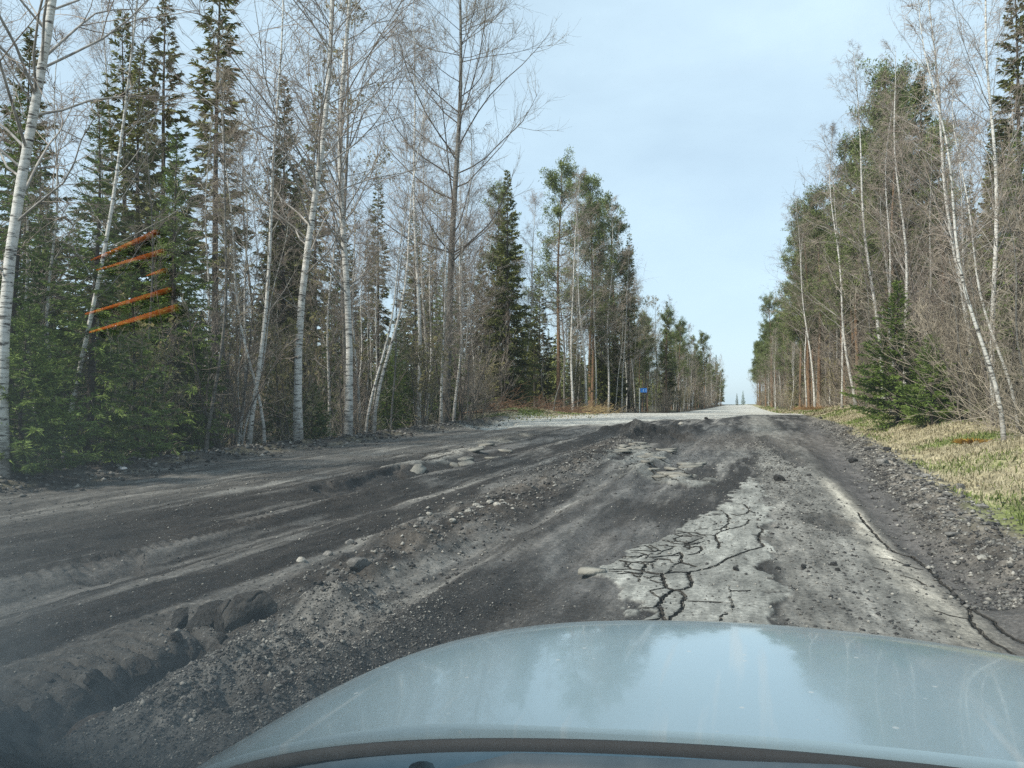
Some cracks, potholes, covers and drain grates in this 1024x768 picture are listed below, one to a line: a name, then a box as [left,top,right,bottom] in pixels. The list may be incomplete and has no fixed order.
crack [609,503,765,621]
crack [857,512,1024,655]
